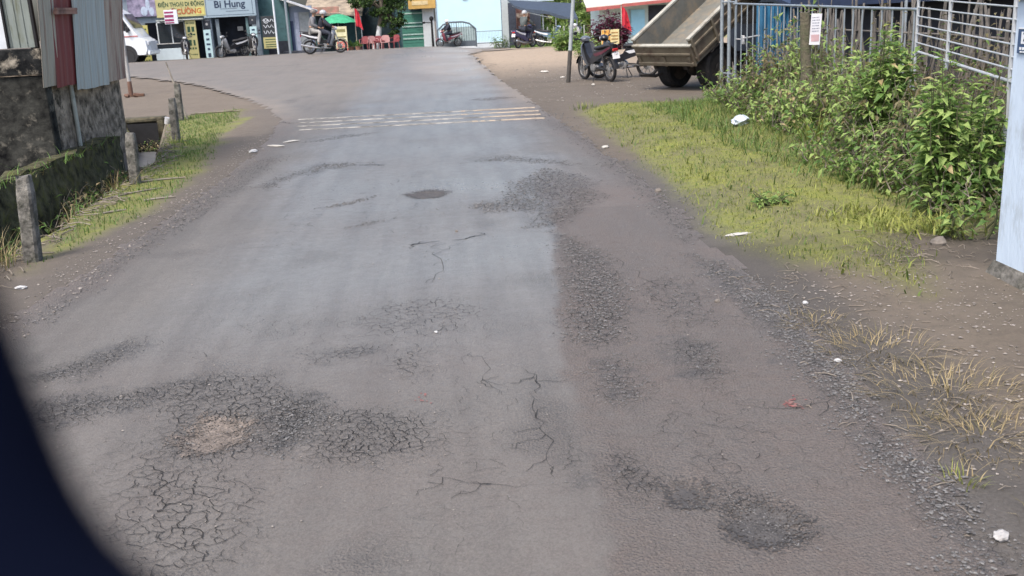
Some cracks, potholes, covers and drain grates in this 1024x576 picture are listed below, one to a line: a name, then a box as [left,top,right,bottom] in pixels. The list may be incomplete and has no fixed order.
pothole [156,401,267,468]
crack [92,347,338,475]
crack [91,437,292,576]
pothole [403,188,453,199]
crack [163,230,884,573]
crack [233,162,485,283]
